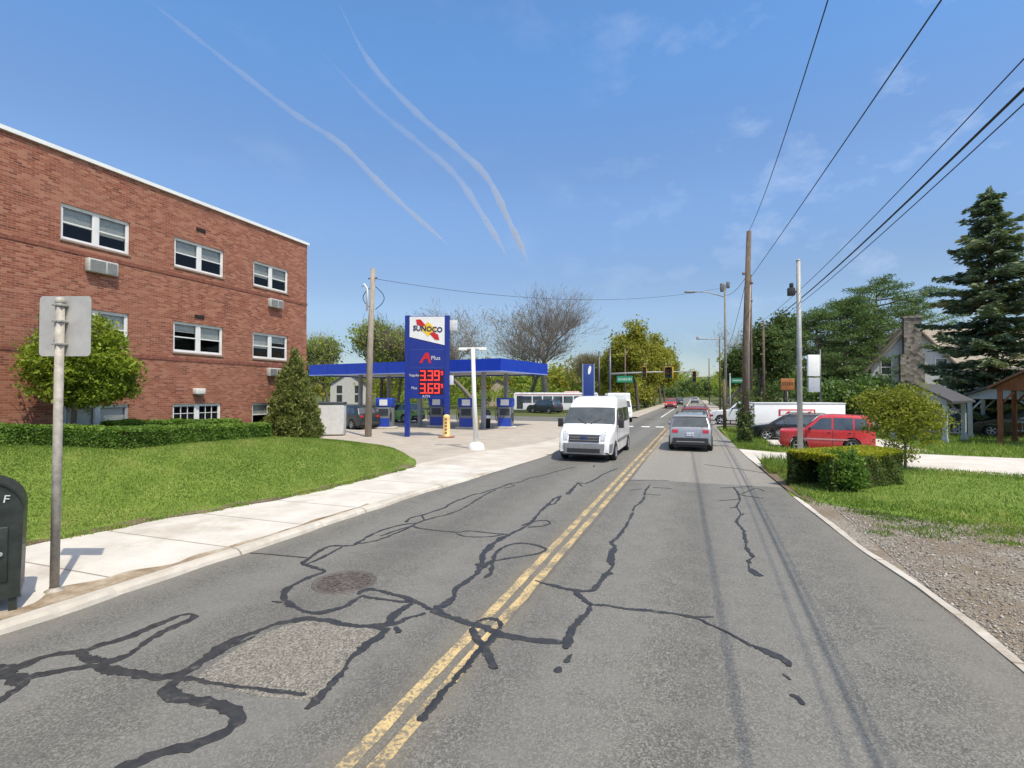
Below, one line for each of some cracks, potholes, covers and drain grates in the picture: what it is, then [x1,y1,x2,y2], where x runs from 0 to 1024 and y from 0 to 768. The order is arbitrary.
manhole cover [311,571,377,594]
